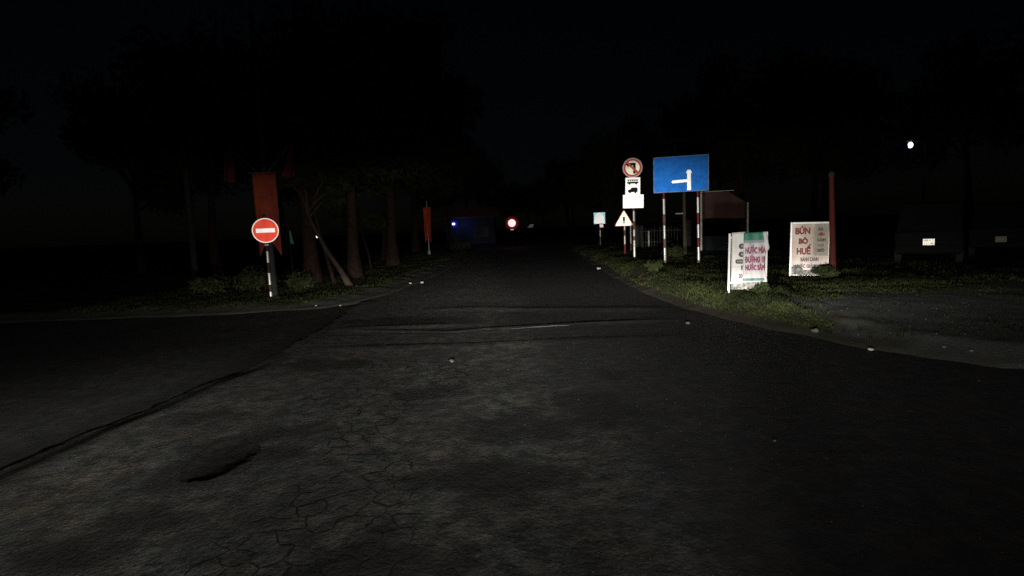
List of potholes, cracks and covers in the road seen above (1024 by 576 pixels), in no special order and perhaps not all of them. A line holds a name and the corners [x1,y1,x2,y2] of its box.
pothole [177,437,262,483]
